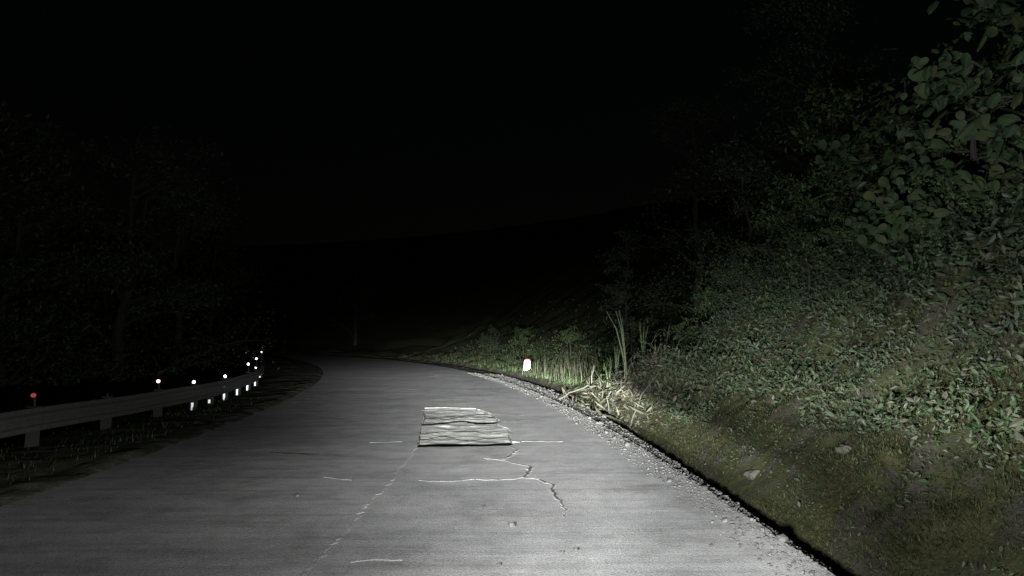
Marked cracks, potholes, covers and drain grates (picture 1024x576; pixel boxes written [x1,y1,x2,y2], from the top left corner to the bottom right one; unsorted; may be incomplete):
crack [419,441,569,517]
